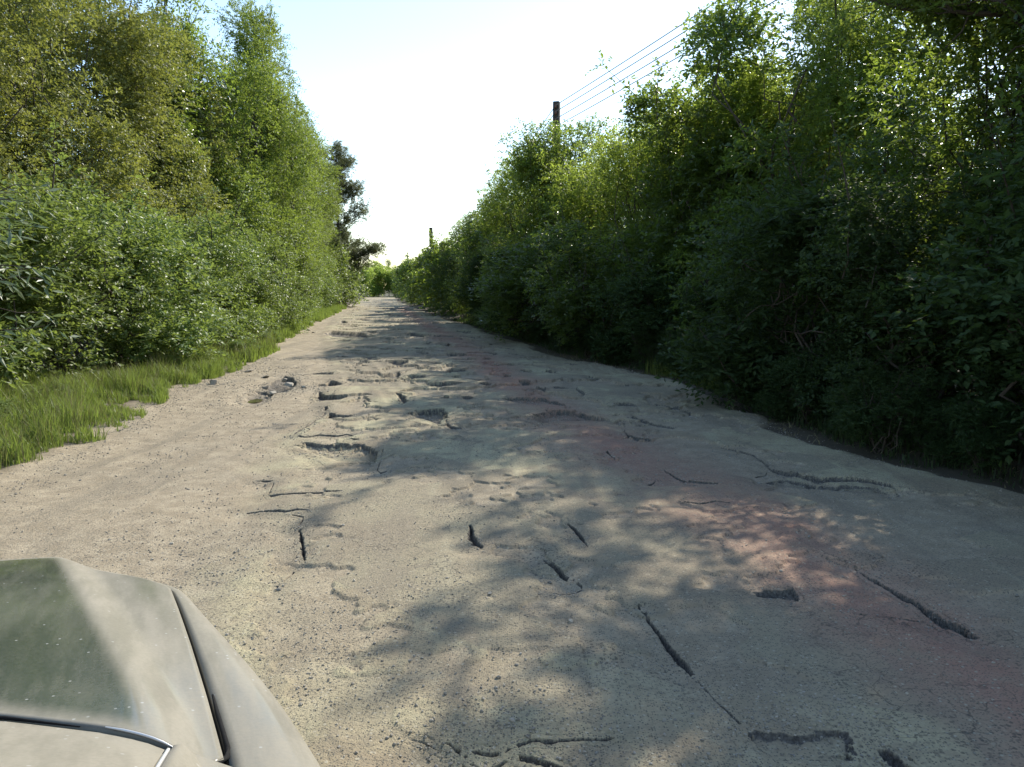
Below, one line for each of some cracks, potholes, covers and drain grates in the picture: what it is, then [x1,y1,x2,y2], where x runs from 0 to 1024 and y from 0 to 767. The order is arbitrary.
pothole [261,376,299,393]
crack [839,557,985,642]
crack [538,521,593,596]
crack [549,386,588,397]
pothole [402,407,452,426]
crack [243,478,347,533]
crack [633,601,751,735]
pothole [747,586,805,604]
crack [660,445,904,507]
crack [286,411,391,475]
